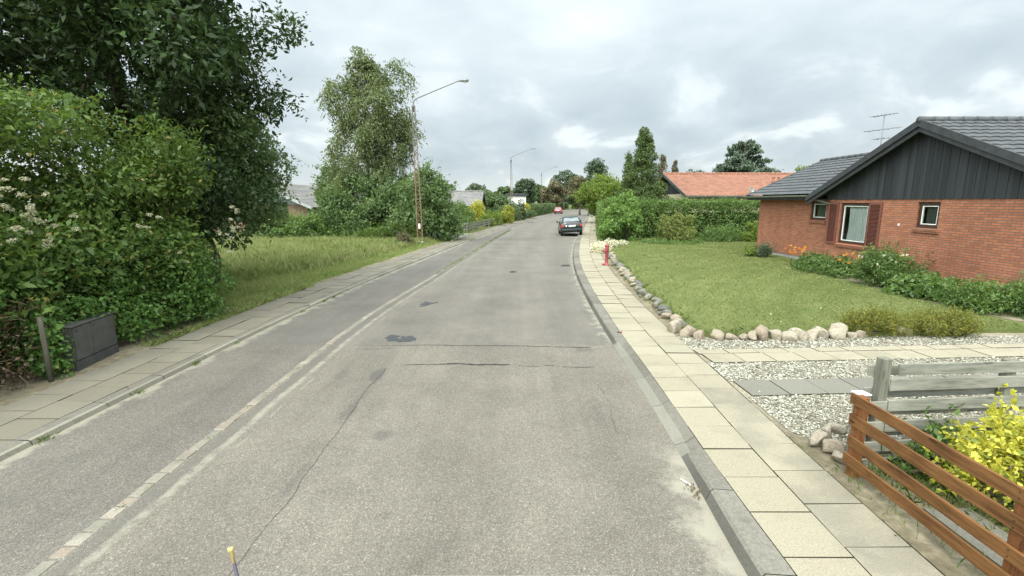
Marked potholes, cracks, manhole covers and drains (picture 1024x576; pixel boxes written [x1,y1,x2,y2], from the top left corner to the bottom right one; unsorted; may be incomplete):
crack [228,368,386,576]
